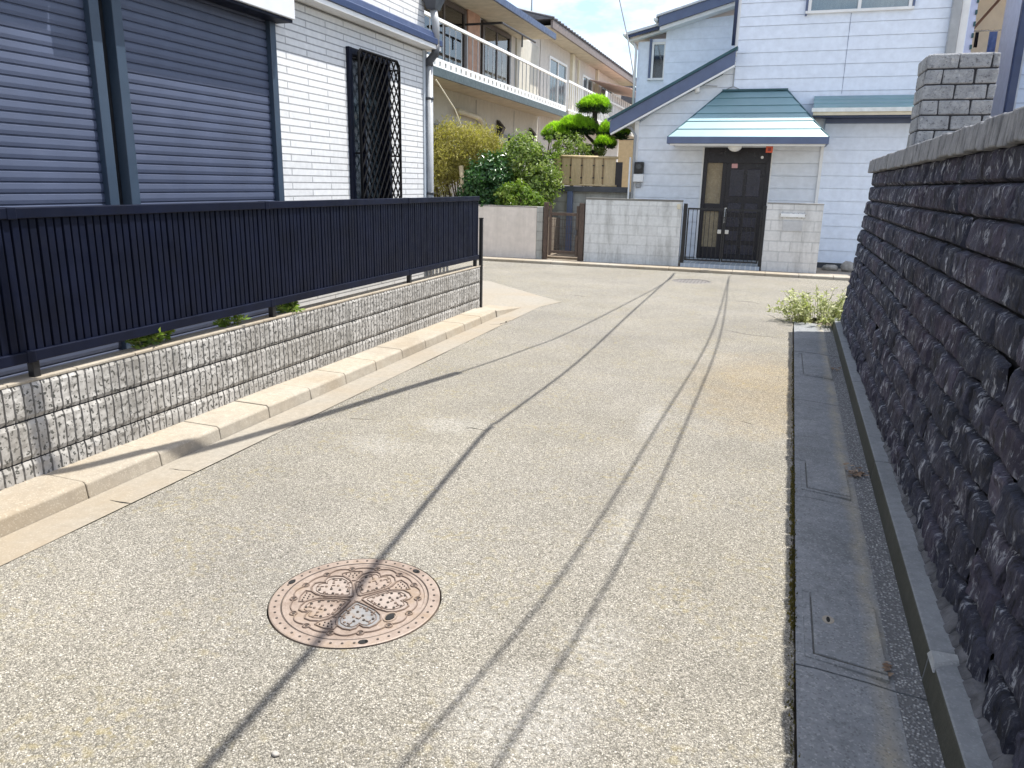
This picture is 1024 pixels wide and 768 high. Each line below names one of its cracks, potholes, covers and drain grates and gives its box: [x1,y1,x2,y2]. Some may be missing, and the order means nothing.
manhole cover [268,559,440,650]
